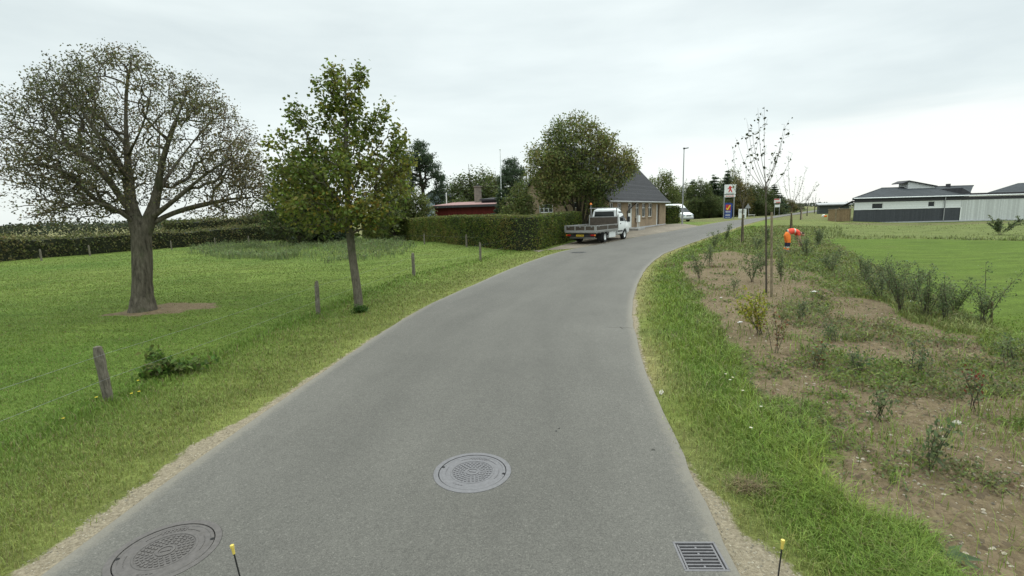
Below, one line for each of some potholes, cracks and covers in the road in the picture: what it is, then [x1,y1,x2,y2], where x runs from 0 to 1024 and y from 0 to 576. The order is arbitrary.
manhole cover [102,520,222,576]
drain grate [672,541,730,571]
manhole cover [433,453,511,493]
